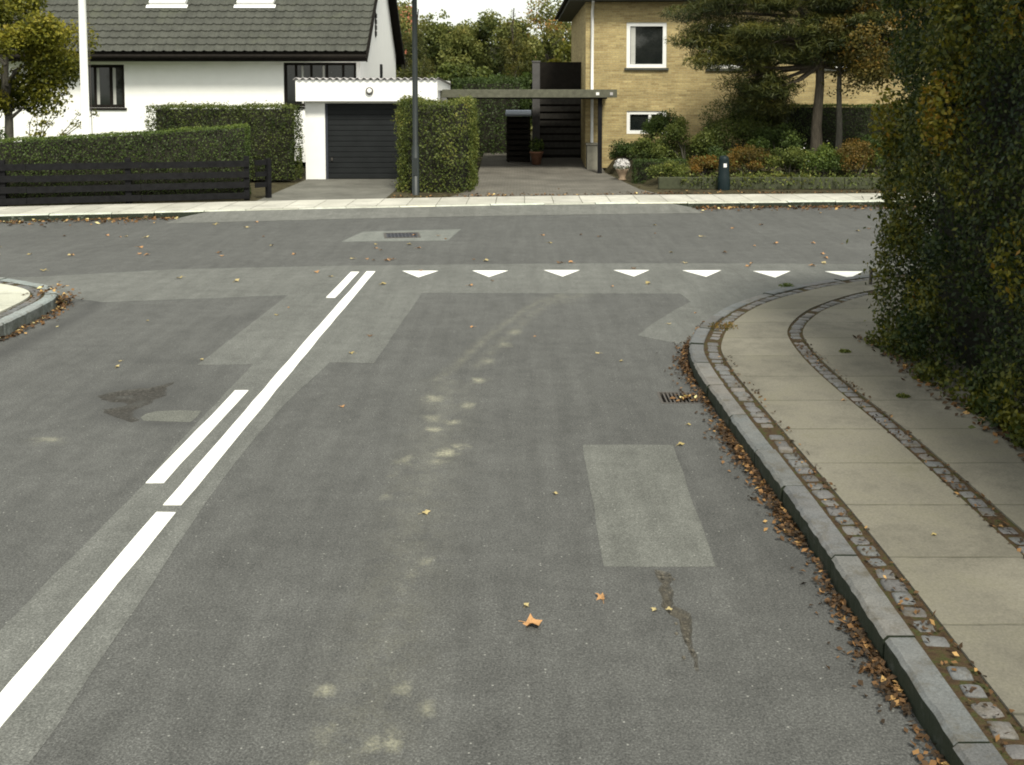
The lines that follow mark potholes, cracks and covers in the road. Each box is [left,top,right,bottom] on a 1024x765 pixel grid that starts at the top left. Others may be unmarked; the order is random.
crack [654,569,699,671]
drain grate [656,392,702,403]
